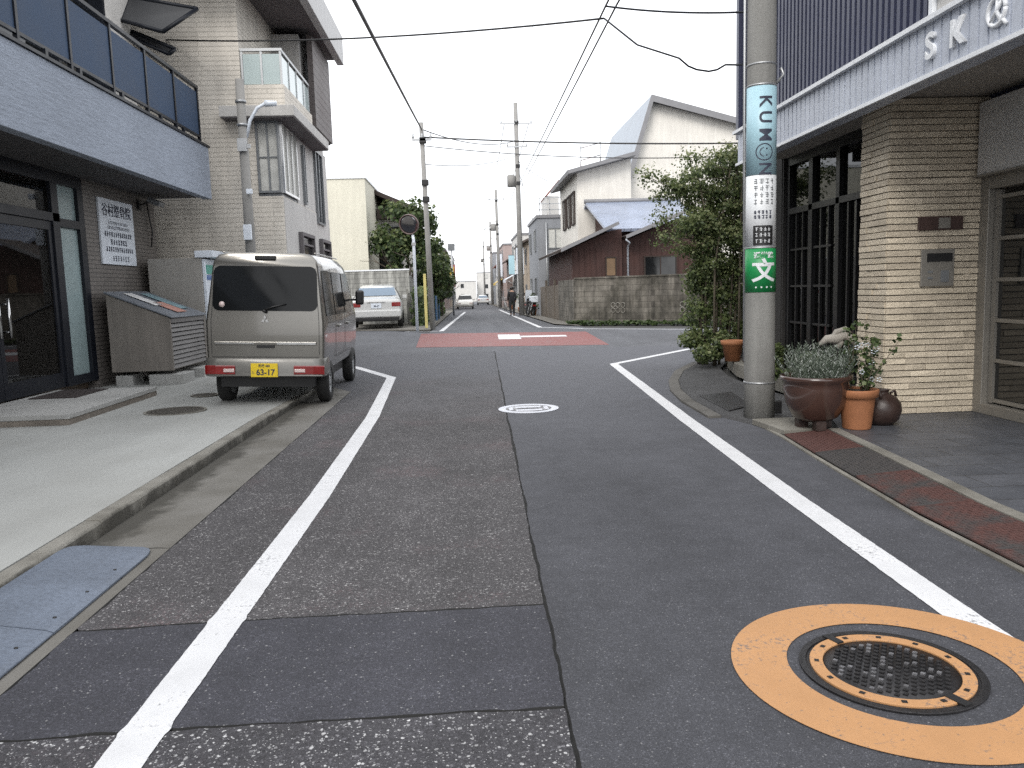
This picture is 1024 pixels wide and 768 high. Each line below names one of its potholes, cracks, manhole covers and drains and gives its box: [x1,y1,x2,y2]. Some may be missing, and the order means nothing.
manhole cover [799,631,991,715]
manhole cover [143,406,207,416]
drain grate [700,392,744,411]
manhole cover [498,404,559,413]
